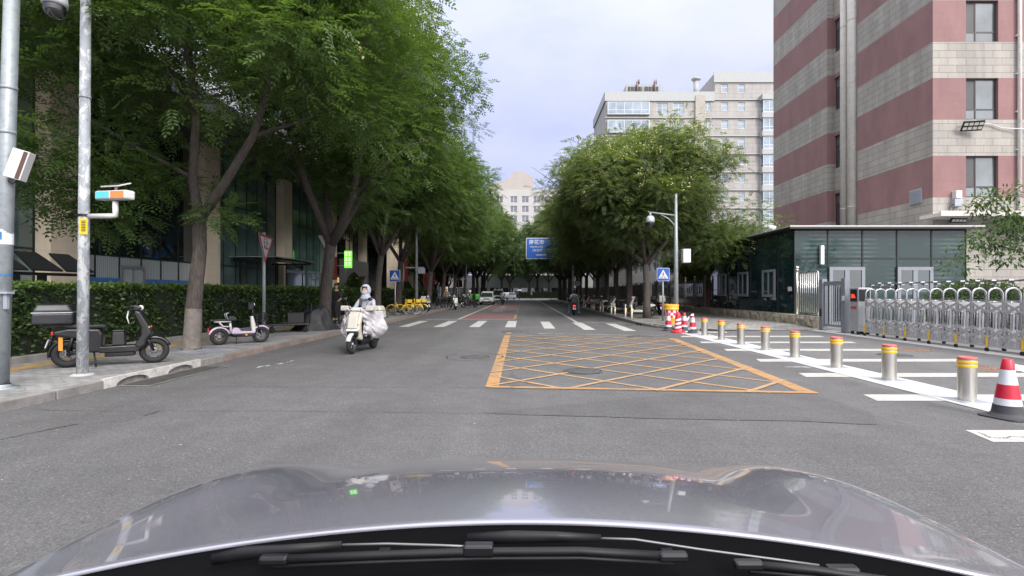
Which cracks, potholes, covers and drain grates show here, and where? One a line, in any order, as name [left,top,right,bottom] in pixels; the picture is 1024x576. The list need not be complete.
drain grate [96,359,201,389]
drain grate [117,366,228,386]
